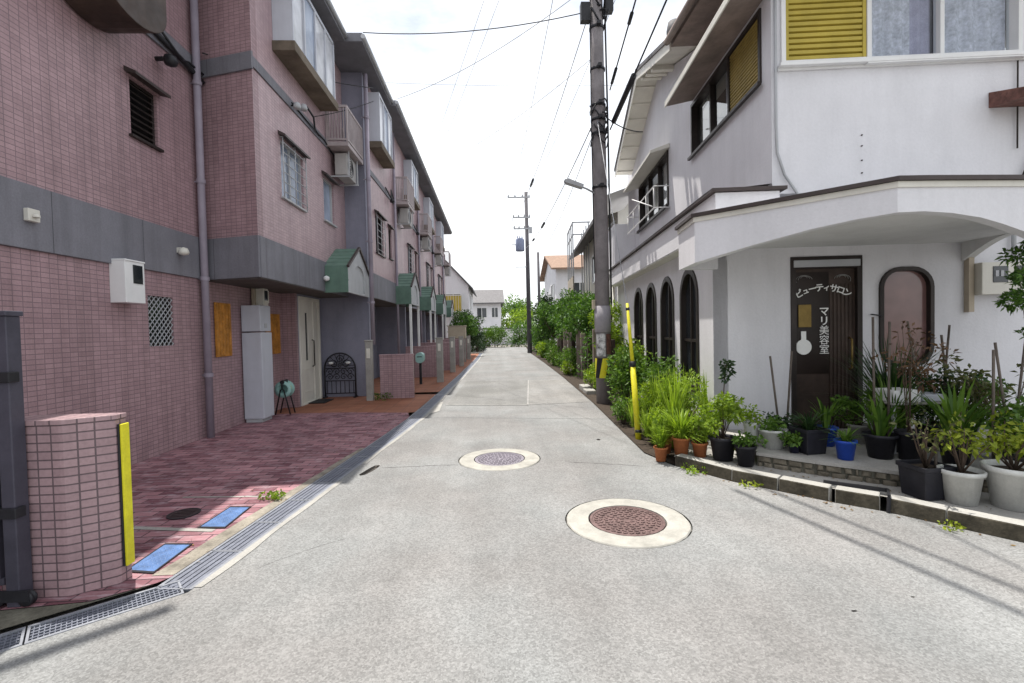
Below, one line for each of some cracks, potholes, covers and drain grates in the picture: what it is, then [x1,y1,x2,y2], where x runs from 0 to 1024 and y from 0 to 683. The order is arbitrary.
drain grate [255,500,312,522]
manhole cover [166,508,201,520]
drain grate [212,522,282,551]
drain grate [368,430,406,446]
drain grate [420,395,445,409]
drain grate [0,626,26,652]
drain grate [335,456,371,468]
drain grate [314,468,356,483]
drain grate [288,482,336,500]
manhole cover [459,448,540,471]
